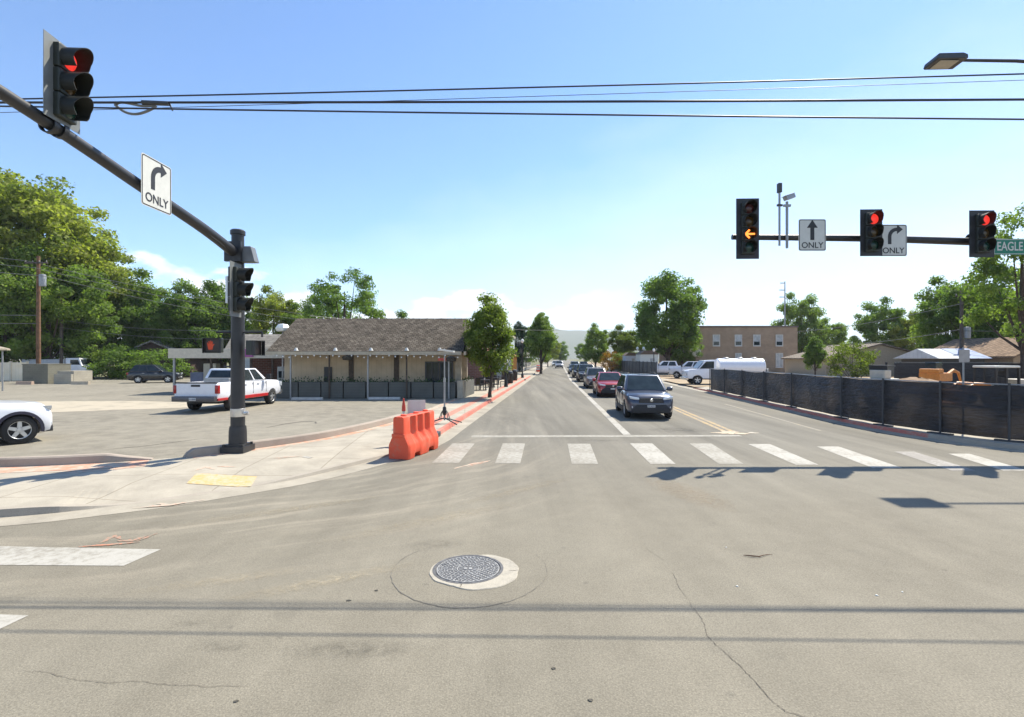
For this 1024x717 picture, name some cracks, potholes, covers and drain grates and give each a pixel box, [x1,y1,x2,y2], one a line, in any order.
manhole cover [429,555,519,590]
crack [19,670,229,687]
crack [655,554,804,717]
